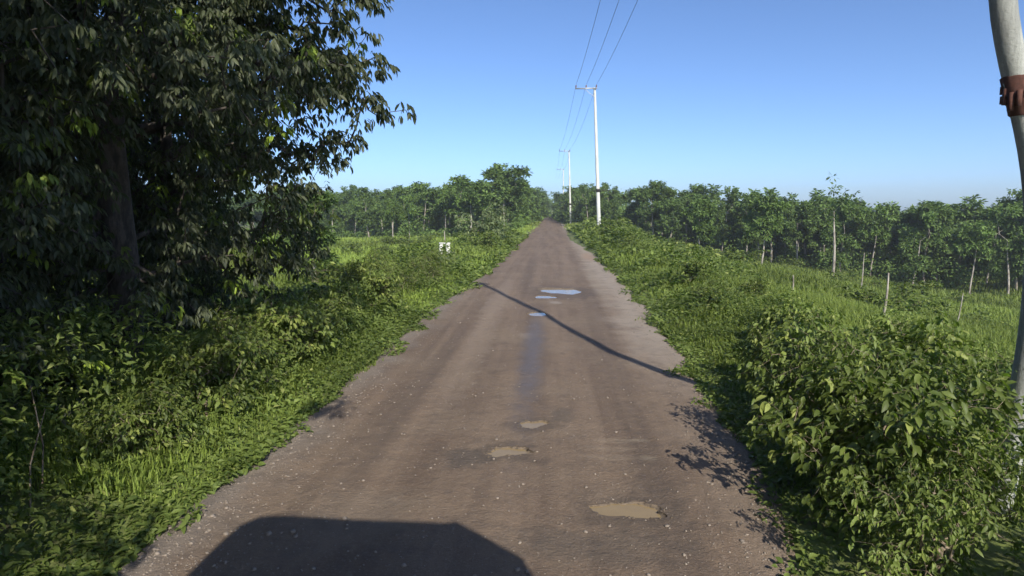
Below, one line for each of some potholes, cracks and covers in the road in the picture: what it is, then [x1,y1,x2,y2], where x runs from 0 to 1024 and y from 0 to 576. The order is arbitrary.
pothole [589,499,673,520]
pothole [516,418,551,429]
pothole [535,287,583,295]
pothole [484,444,536,458]
